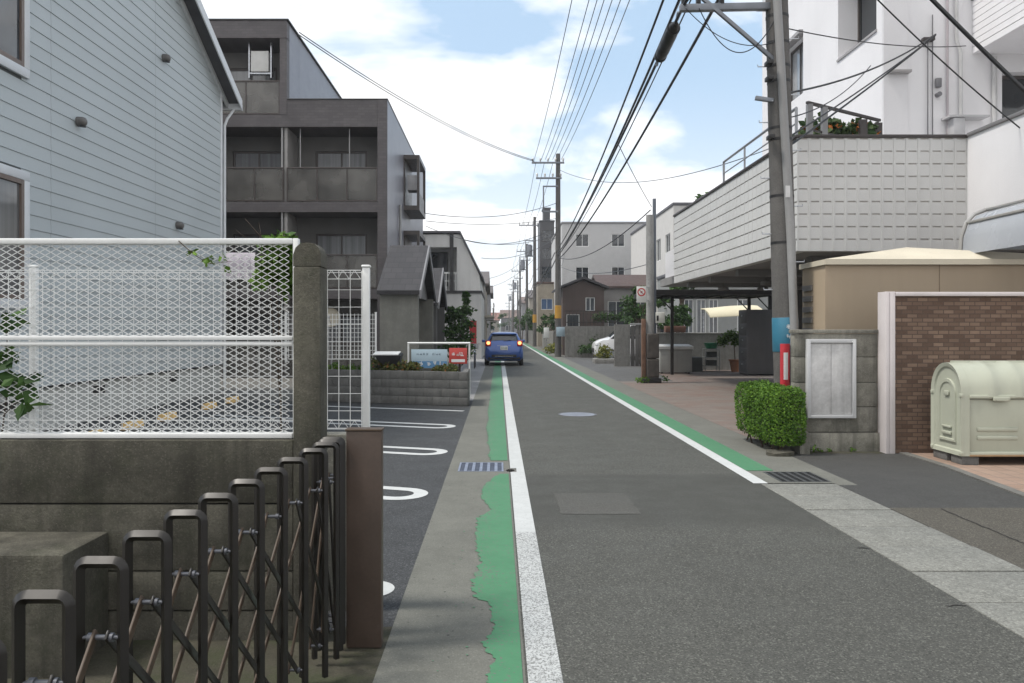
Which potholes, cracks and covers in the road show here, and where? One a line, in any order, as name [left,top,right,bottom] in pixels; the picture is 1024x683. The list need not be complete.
drain grate [458,462,504,471]
drain grate [764,472,832,484]
